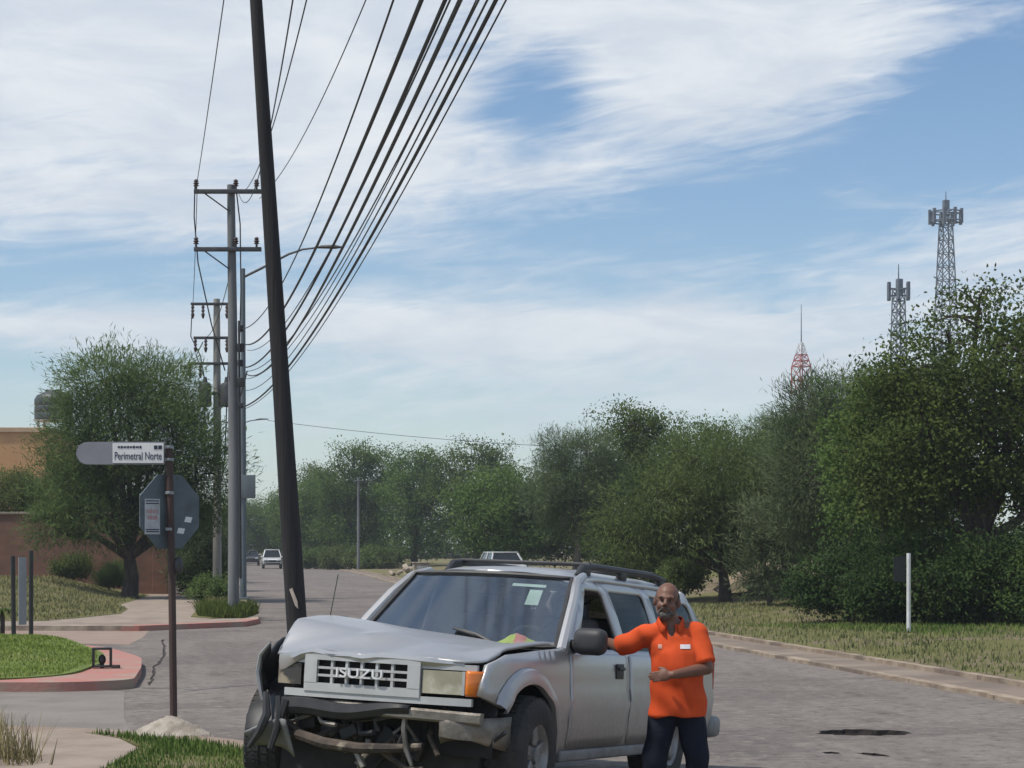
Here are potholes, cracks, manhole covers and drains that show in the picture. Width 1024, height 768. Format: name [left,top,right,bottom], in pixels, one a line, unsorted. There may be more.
crack [148,640,167,685]
